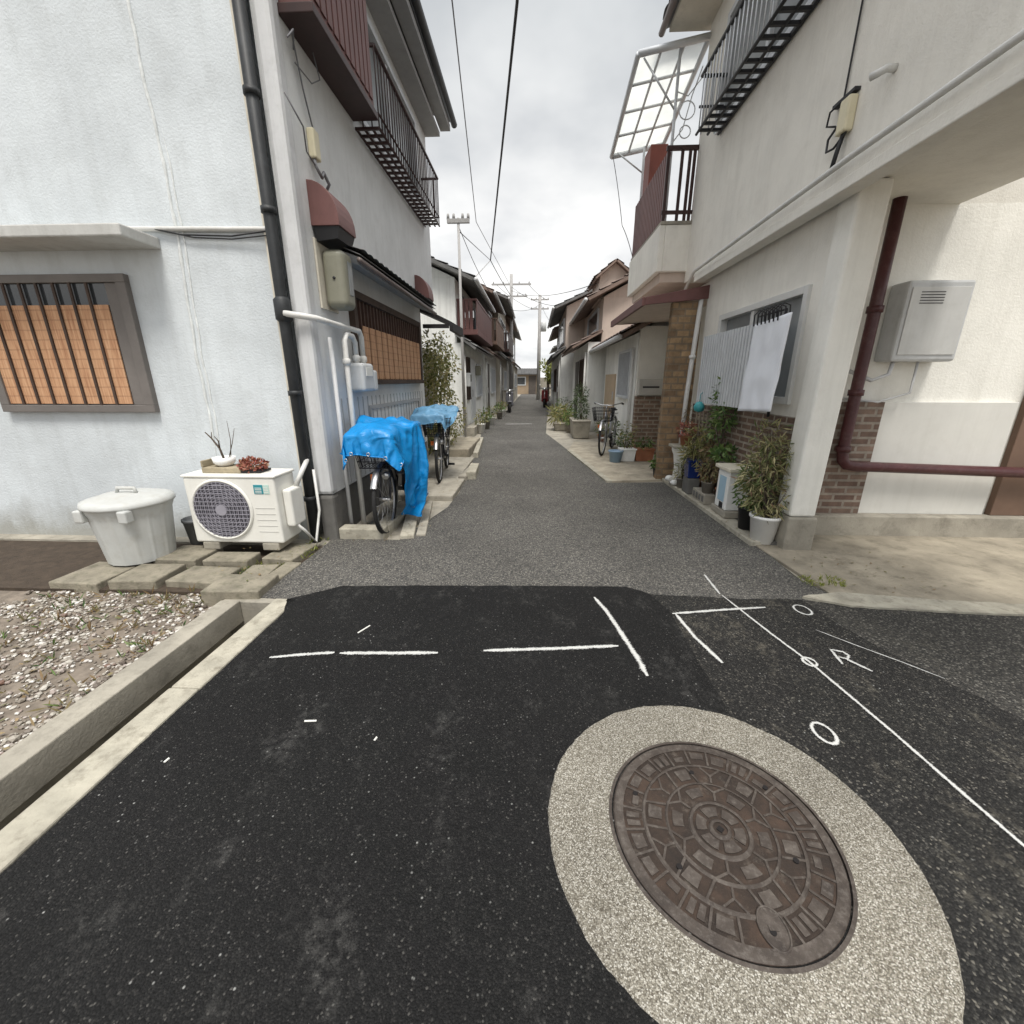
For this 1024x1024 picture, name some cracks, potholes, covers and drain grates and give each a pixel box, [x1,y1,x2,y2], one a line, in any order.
manhole cover [609,741,858,974]
